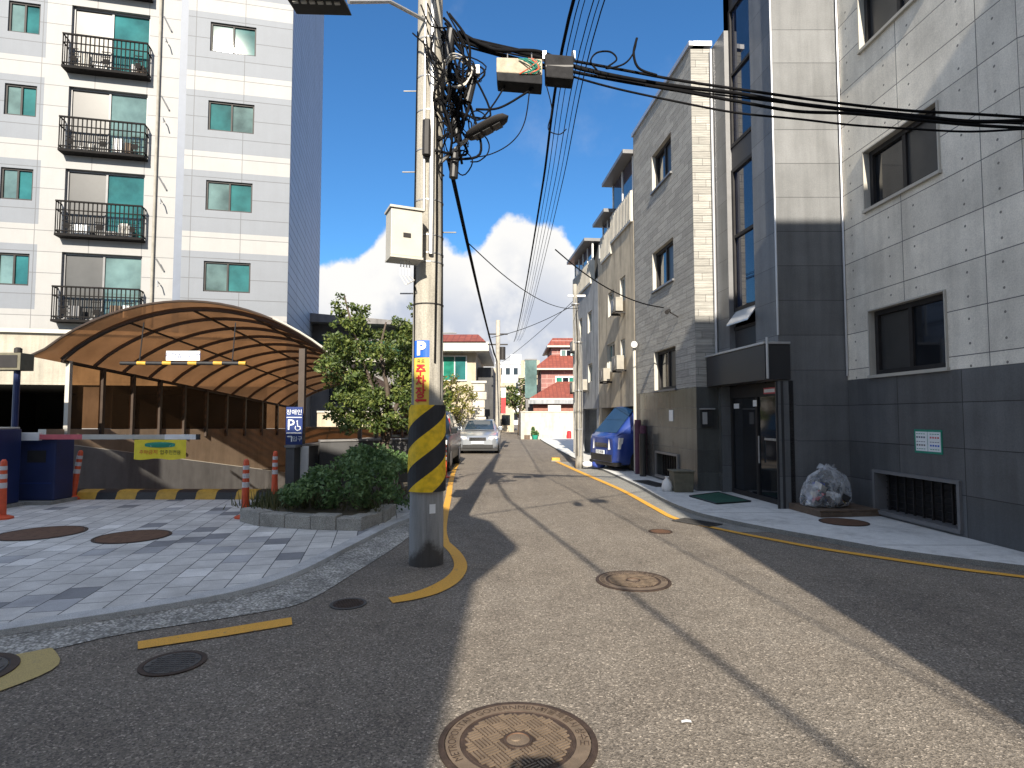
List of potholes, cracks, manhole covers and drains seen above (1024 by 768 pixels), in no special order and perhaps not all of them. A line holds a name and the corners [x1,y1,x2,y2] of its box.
manhole cover [438,702,598,768]
manhole cover [137,650,207,677]
manhole cover [91,529,172,544]
manhole cover [0,526,89,541]
manhole cover [818,518,870,526]
manhole cover [330,598,367,610]
manhole cover [596,570,672,592]
manhole cover [0,652,21,677]
